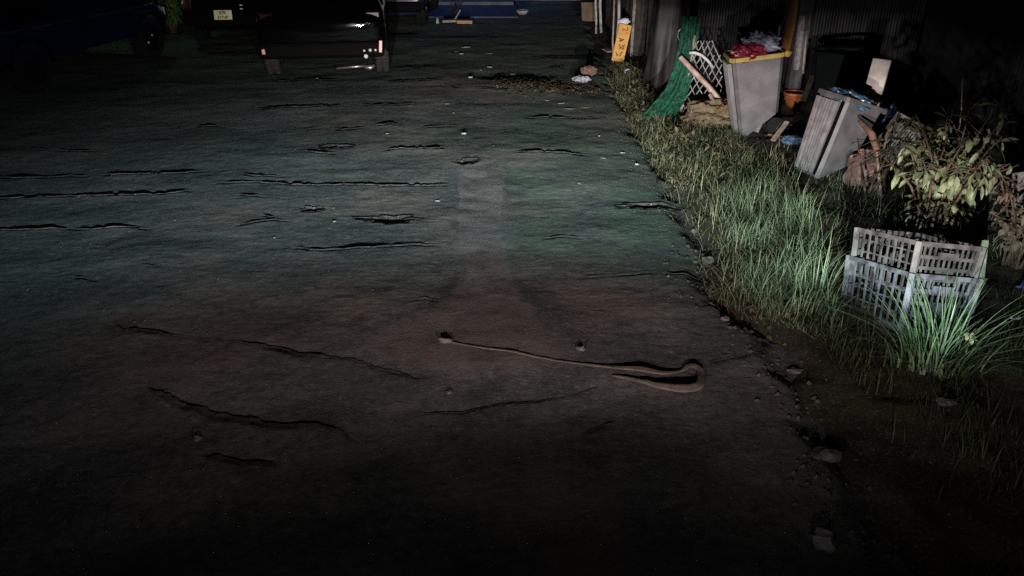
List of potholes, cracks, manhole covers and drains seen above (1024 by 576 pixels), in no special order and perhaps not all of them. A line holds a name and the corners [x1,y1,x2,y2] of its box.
crack [106,313,427,468]
crack [0,170,438,199]
